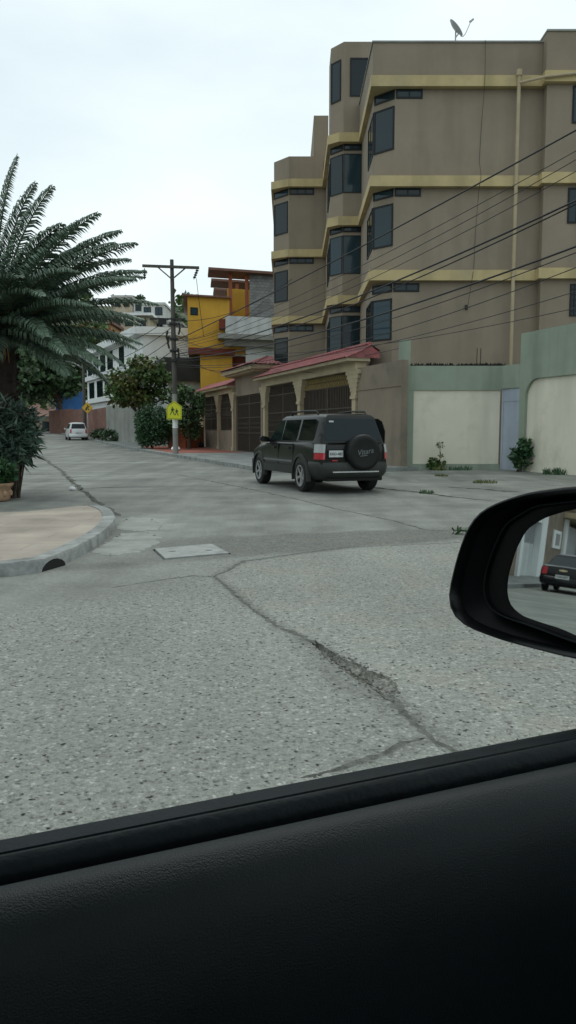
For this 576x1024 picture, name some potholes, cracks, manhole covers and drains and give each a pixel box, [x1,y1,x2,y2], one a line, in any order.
manhole cover [153,544,230,560]
crack [374,487,517,501]
